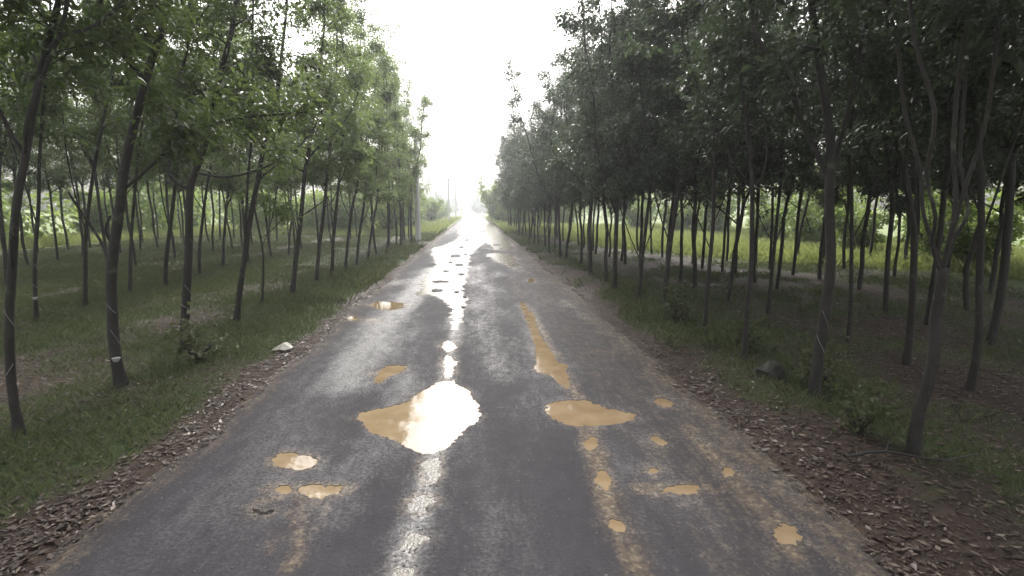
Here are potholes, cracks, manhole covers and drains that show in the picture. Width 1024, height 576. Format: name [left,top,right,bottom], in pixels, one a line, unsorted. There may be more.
pothole [773,523,803,545]
pothole [660,484,700,495]
pothole [594,470,613,492]
pothole [373,365,407,383]
pothole [545,400,637,427]
pothole [654,398,674,407]
pothole [271,452,318,470]
pothole [298,484,343,499]
pothole [608,518,626,532]
pothole [519,302,572,389]
pothole [356,379,482,454]
pothole [369,301,404,310]
